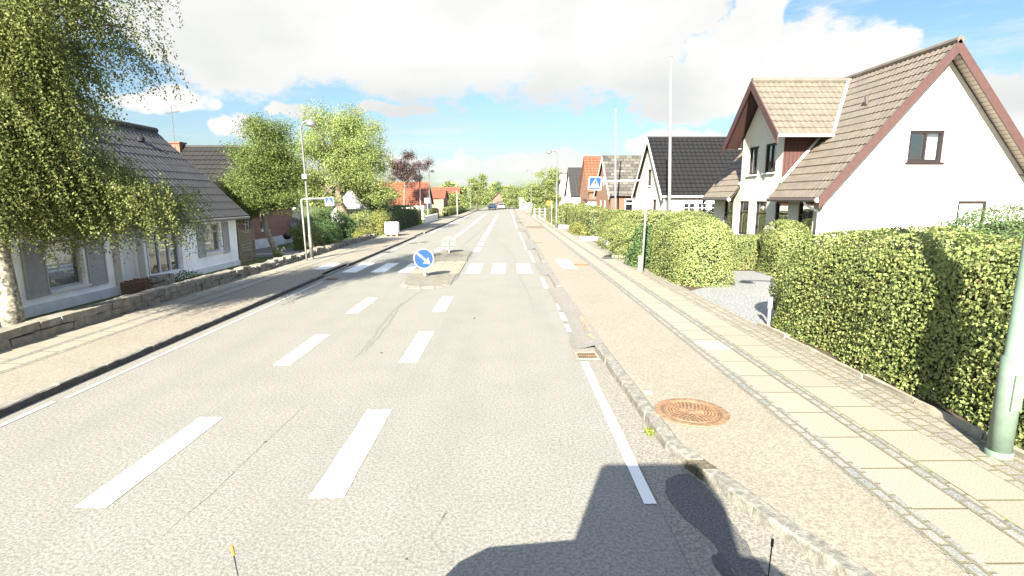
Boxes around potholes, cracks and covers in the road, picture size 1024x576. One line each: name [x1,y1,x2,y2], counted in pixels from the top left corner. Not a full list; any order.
manhole cover [654,398,730,427]
crack [167,406,304,532]
